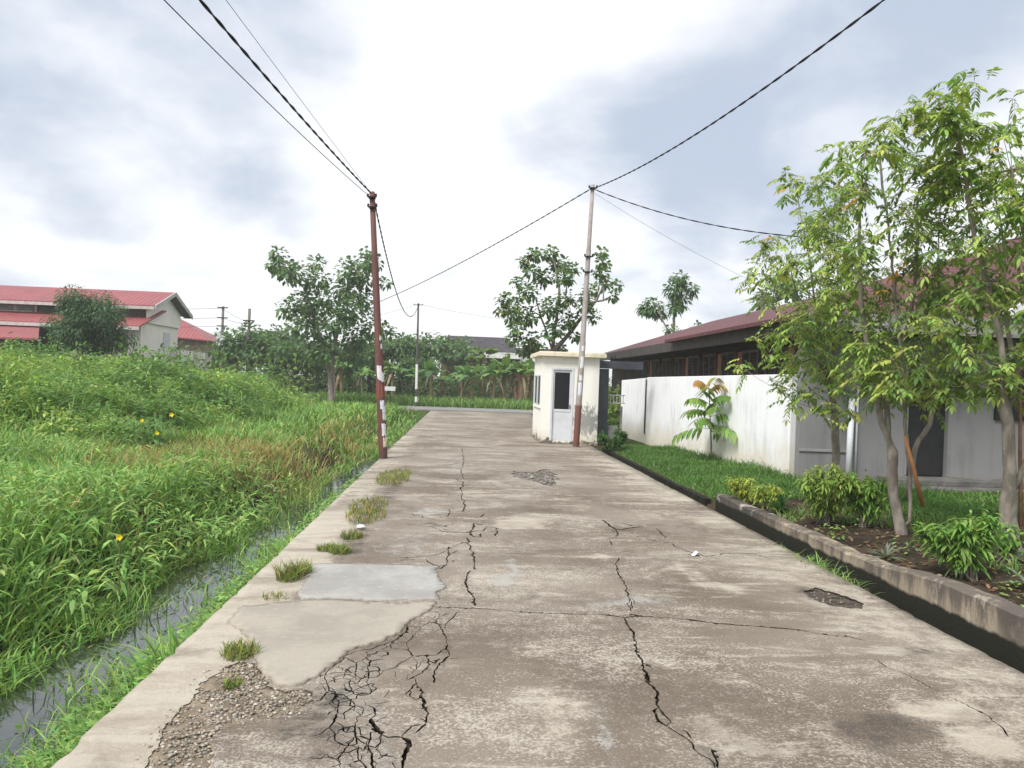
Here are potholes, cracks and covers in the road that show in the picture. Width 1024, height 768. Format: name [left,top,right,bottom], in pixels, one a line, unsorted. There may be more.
crack [601,520,767,768]
pothole [512,469,559,486]
crack [309,449,498,768]
pothole [804,588,864,609]
crack [875,659,1008,736]
pothole [133,654,329,768]
